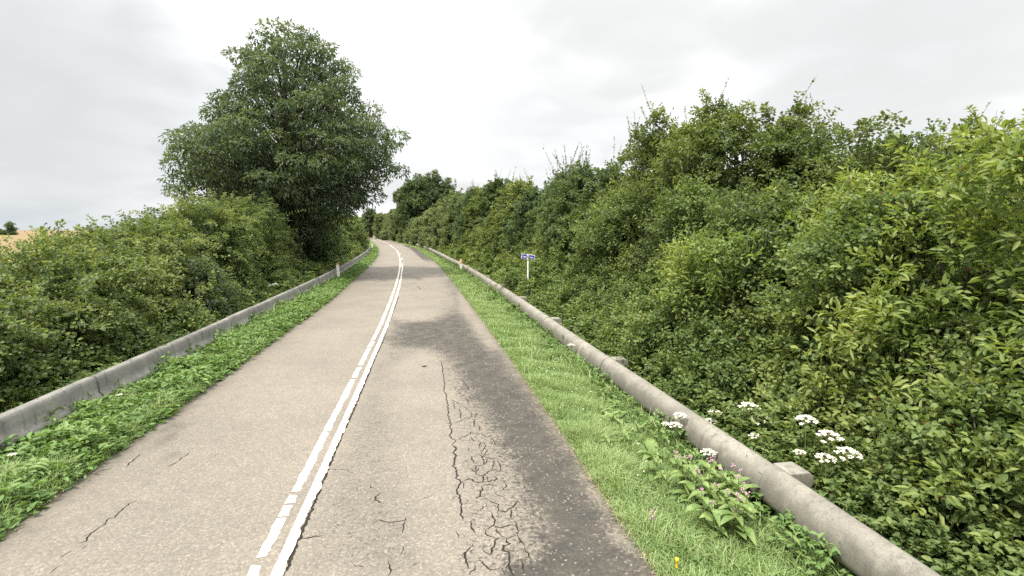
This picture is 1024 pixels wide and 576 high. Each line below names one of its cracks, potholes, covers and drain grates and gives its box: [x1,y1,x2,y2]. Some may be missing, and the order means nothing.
crack [49,453,188,574]
crack [441,363,533,576]
crack [370,484,417,576]
